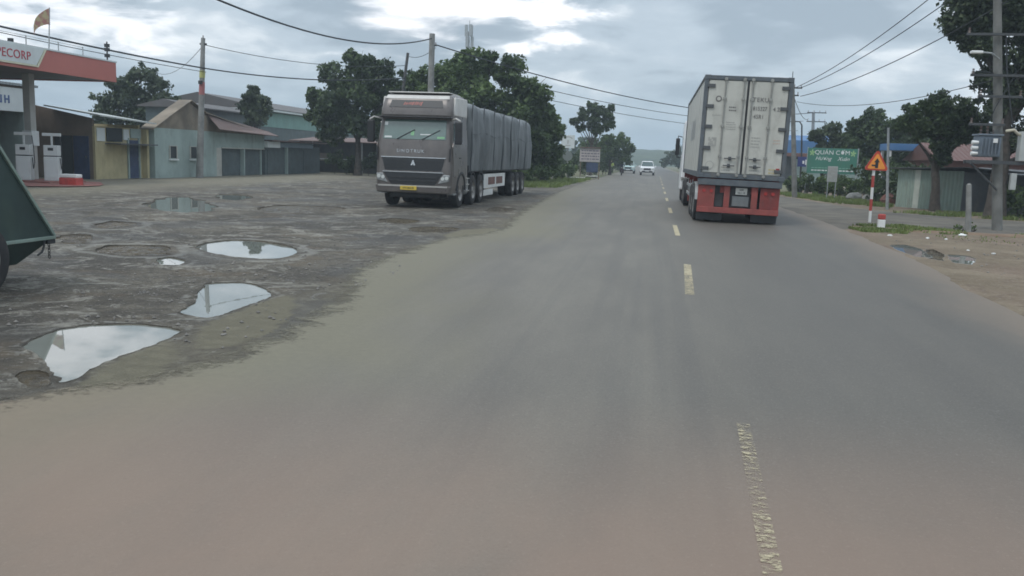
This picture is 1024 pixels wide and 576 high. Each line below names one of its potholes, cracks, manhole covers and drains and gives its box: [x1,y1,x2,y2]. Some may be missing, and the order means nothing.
pothole [153,256,188,266]
pothole [140,196,218,213]
pothole [19,323,184,384]
pothole [12,369,62,389]
pothole [90,245,176,256]
pothole [922,249,946,261]
pothole [889,244,933,259]
pothole [948,255,976,265]
pothole [189,239,300,260]
pothole [177,281,276,318]
